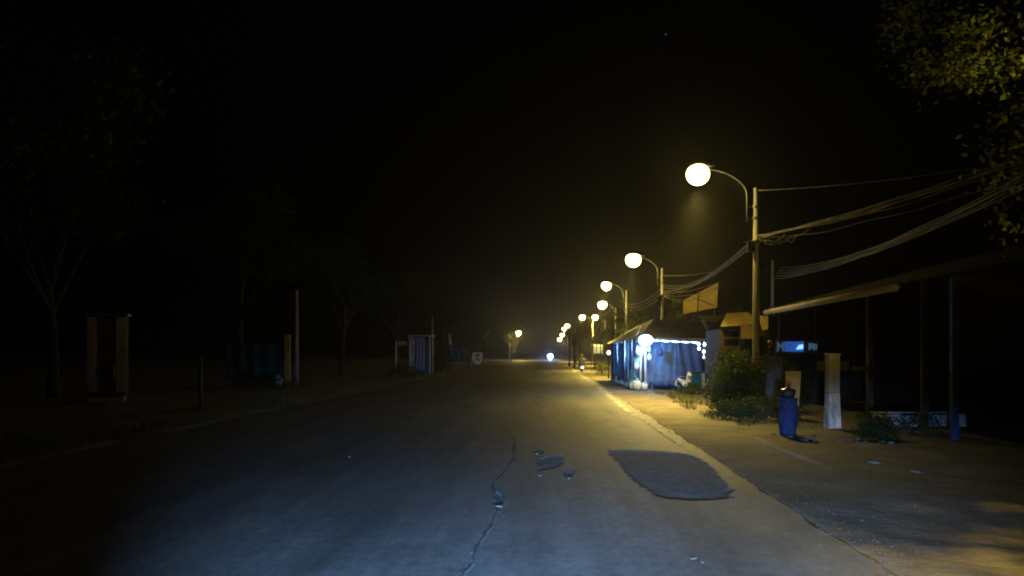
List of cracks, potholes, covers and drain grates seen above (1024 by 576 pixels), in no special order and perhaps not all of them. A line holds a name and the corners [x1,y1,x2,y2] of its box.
pothole [489,490,507,506]
pothole [534,455,566,472]
crack [456,438,517,576]
